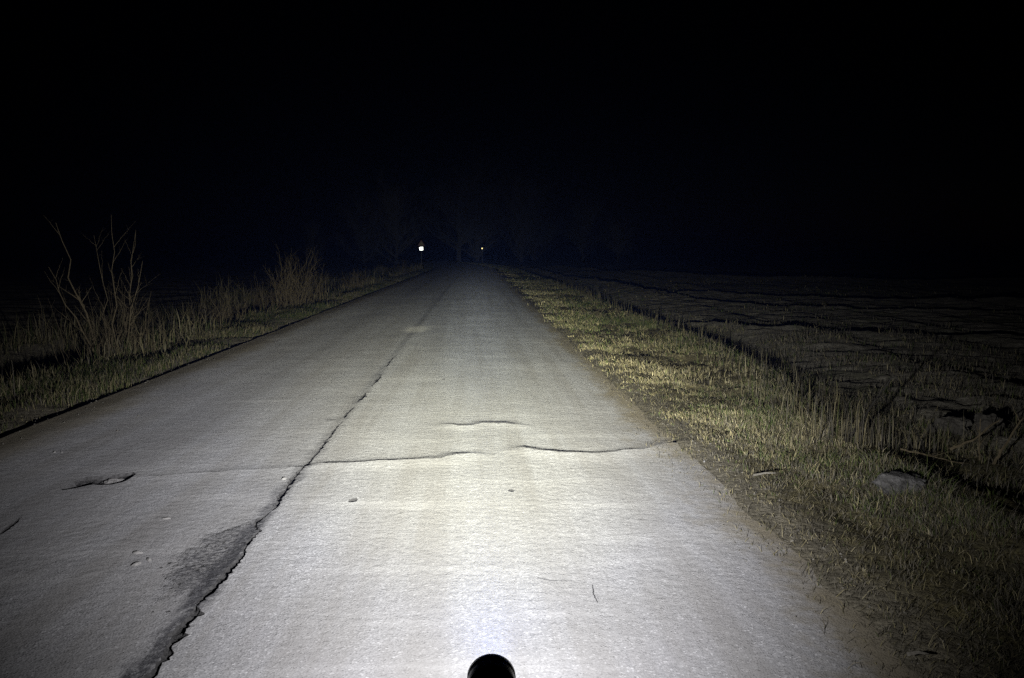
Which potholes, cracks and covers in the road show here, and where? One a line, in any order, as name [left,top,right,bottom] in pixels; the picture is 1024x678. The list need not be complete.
crack [142,358,465,678]
pothole [59,472,136,490]
crack [524,441,671,453]
crack [0,517,22,534]
